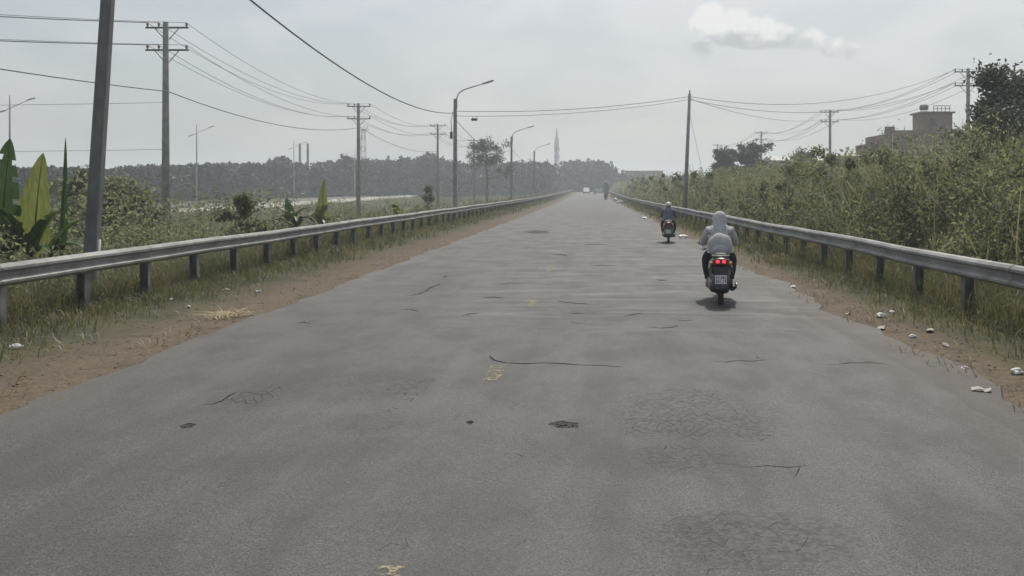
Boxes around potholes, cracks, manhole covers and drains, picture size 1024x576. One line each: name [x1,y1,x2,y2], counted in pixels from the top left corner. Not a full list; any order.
crack [205,387,281,408]
crack [490,356,619,367]
crack [664,510,831,574]
crack [399,276,450,311]
crack [626,389,808,476]
